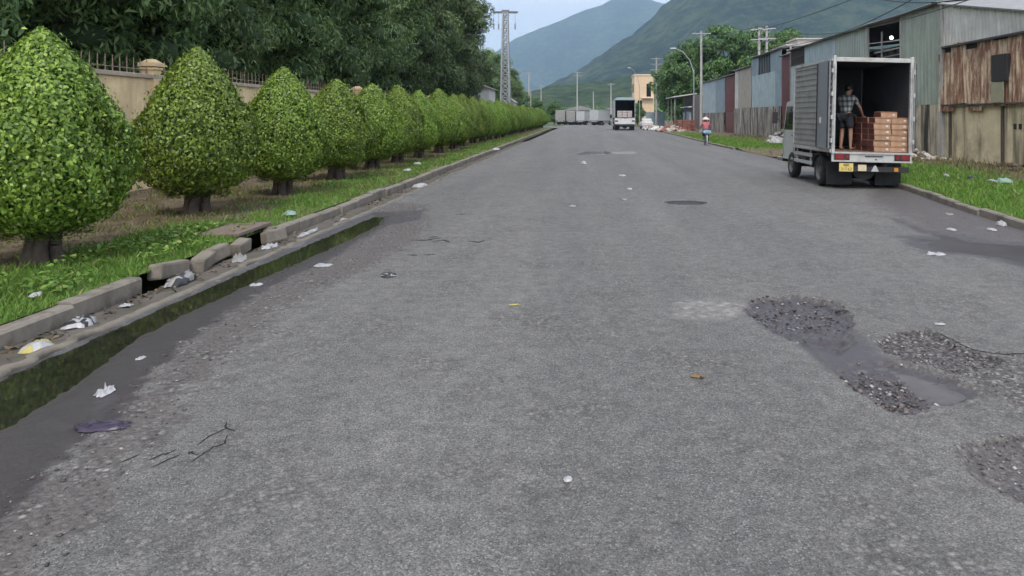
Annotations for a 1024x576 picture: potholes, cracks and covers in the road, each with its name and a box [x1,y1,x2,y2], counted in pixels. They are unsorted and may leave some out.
crack [119,422,235,467]
pothole [871,328,1009,374]
pothole [949,433,1024,504]
crack [937,332,1024,355]
pothole [741,294,858,356]
pothole [832,359,987,415]
